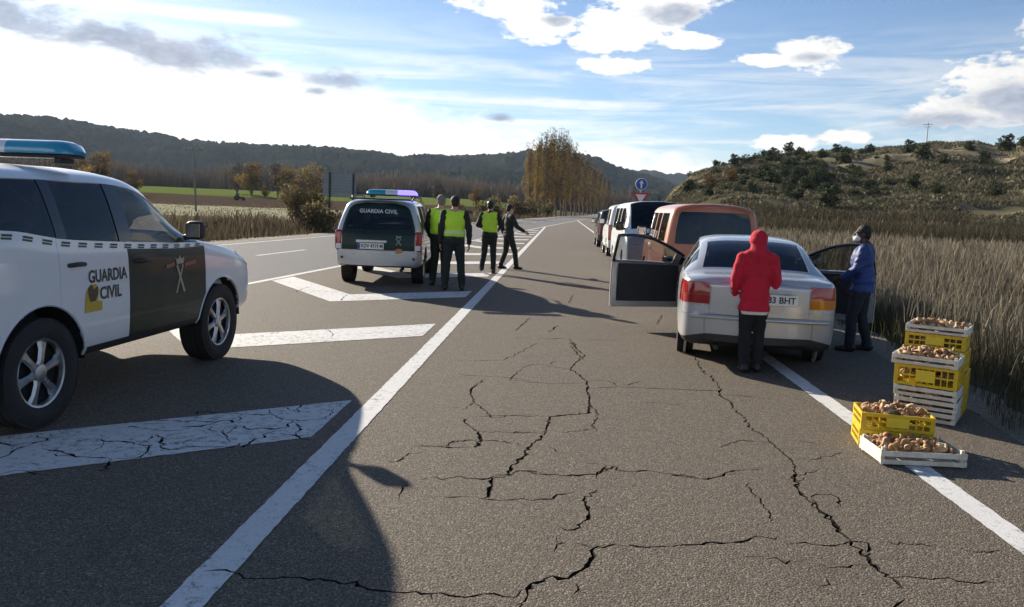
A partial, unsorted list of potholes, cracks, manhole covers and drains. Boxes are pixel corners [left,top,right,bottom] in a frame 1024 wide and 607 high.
crack [214,326,999,607]
